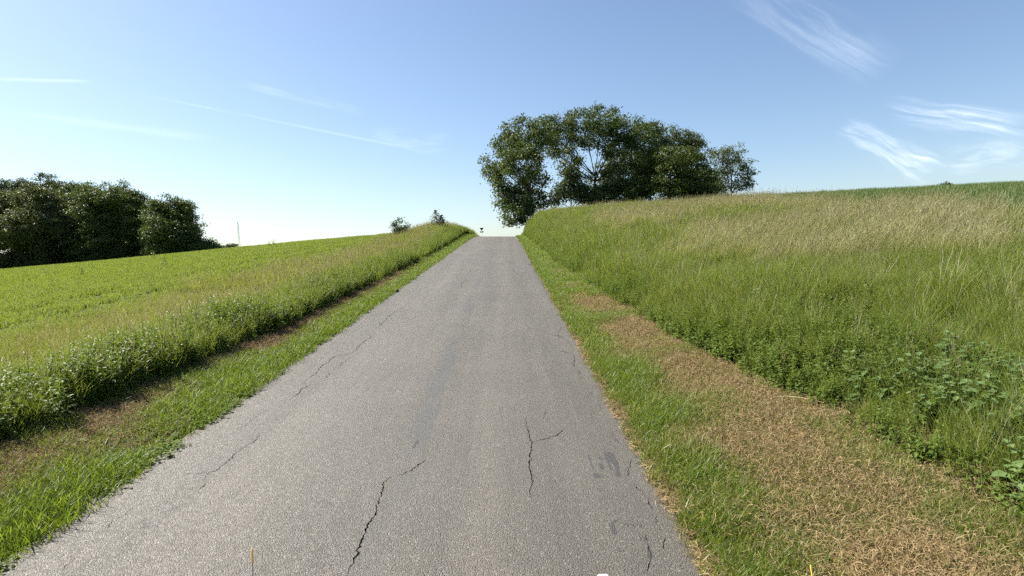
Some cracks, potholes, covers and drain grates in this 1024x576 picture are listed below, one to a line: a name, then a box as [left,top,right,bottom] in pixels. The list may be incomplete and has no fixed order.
crack [525,411,562,499]
crack [187,312,394,489]
crack [627,460,665,574]
crack [347,460,425,576]
